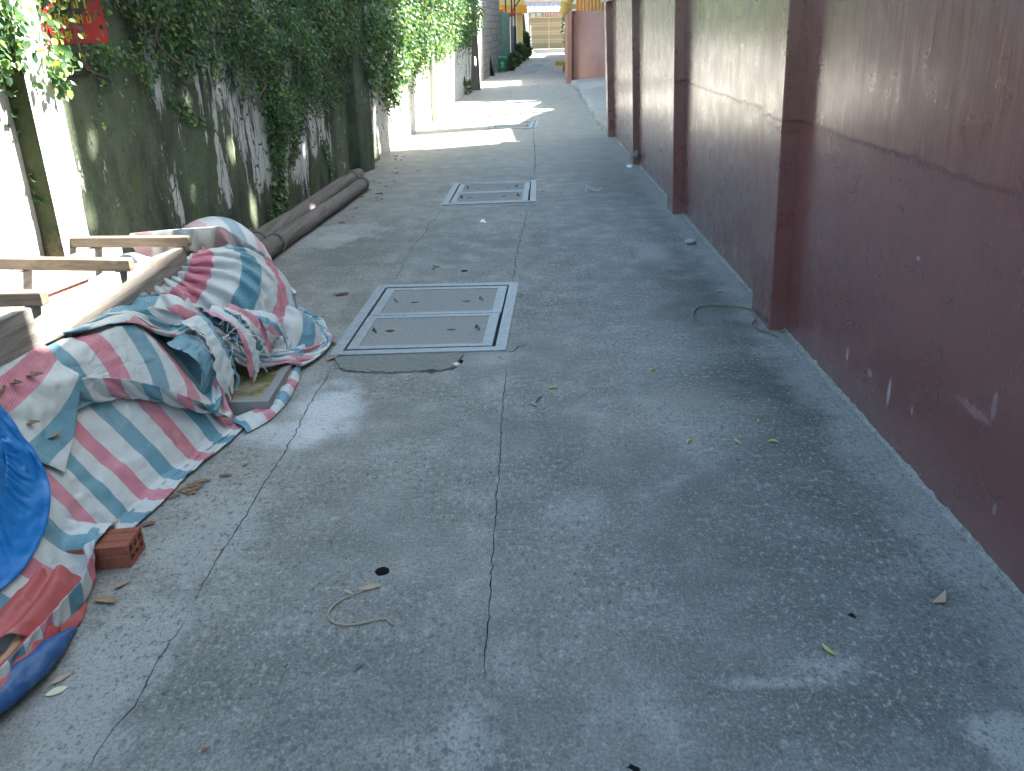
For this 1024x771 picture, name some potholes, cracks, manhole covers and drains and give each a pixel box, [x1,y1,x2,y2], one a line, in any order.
crack [393,129,639,297]
manhole cover [485,120,540,130]
crack [482,343,528,718]
manhole cover [329,282,519,356]
crack [87,360,462,770]
manhole cover [442,180,536,206]
